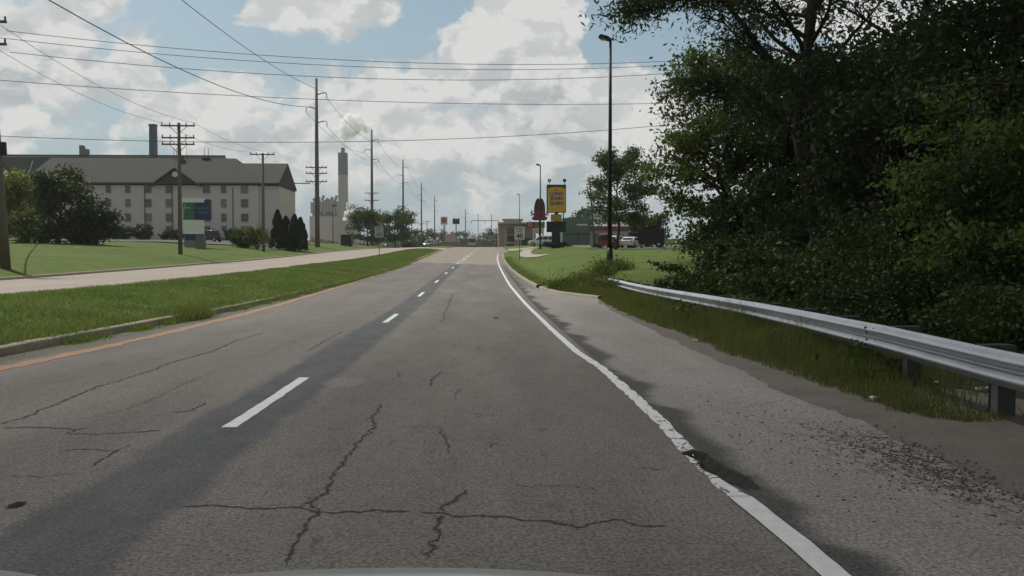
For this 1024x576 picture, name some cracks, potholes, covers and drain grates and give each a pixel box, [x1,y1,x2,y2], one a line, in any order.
crack [183,404,667,565]
crack [1,333,262,466]
pothole [6,501,26,509]
pothole [681,450,761,490]
